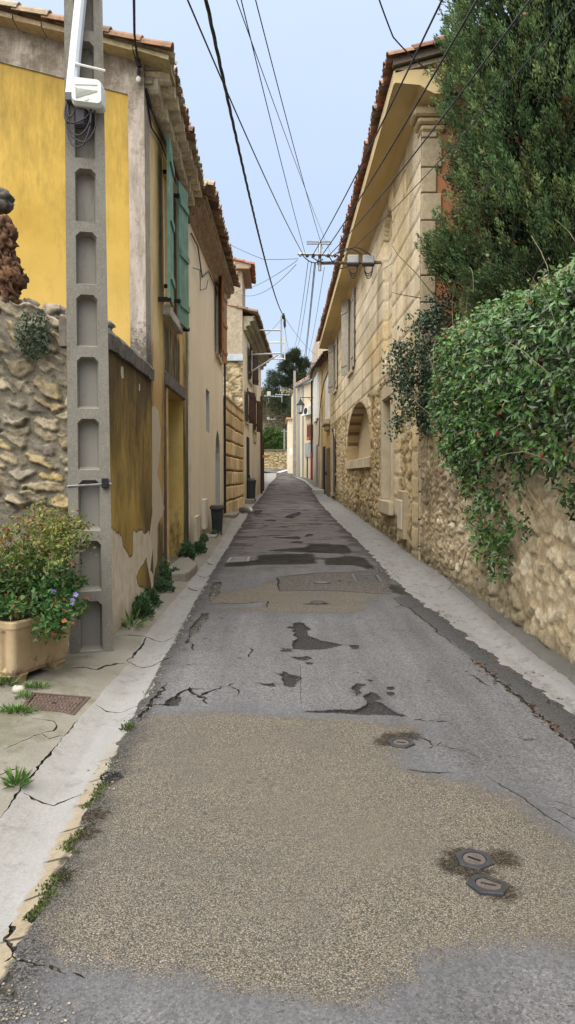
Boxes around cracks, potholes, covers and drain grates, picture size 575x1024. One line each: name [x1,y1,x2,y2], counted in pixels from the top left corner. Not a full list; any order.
crack [7,718,58,748]
crack [138,683,240,721]
manhole cover [387,737,415,749]
manhole cover [466,874,511,896]
manhole cover [454,848,494,871]
crack [3,922,85,978]
crack [486,775,575,833]
manhole cover [22,692,91,715]
